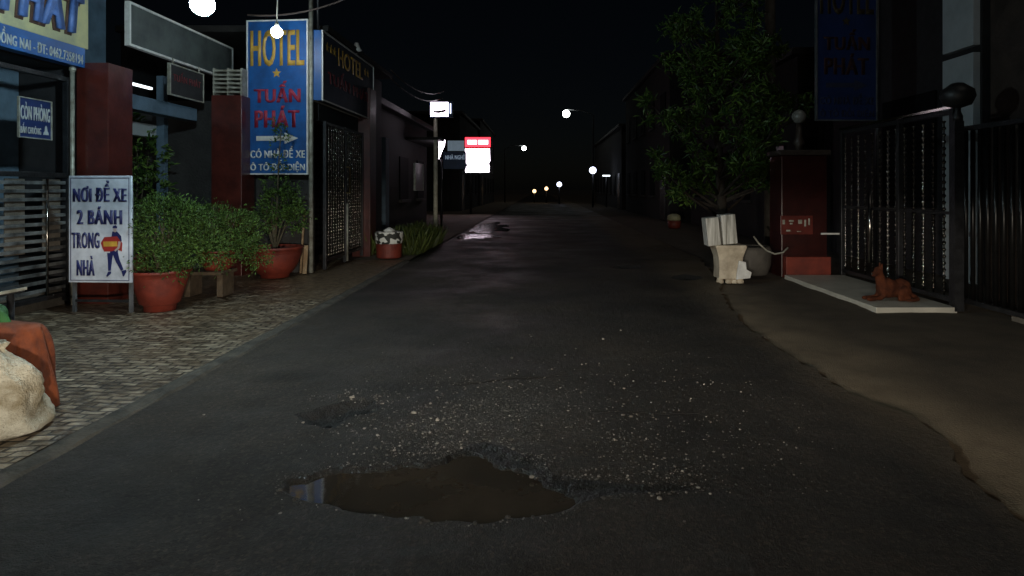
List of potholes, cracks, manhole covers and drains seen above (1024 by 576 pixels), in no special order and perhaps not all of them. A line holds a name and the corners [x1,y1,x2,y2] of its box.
pothole [295,400,382,429]
crack [452,375,568,385]
pothole [282,442,693,524]
